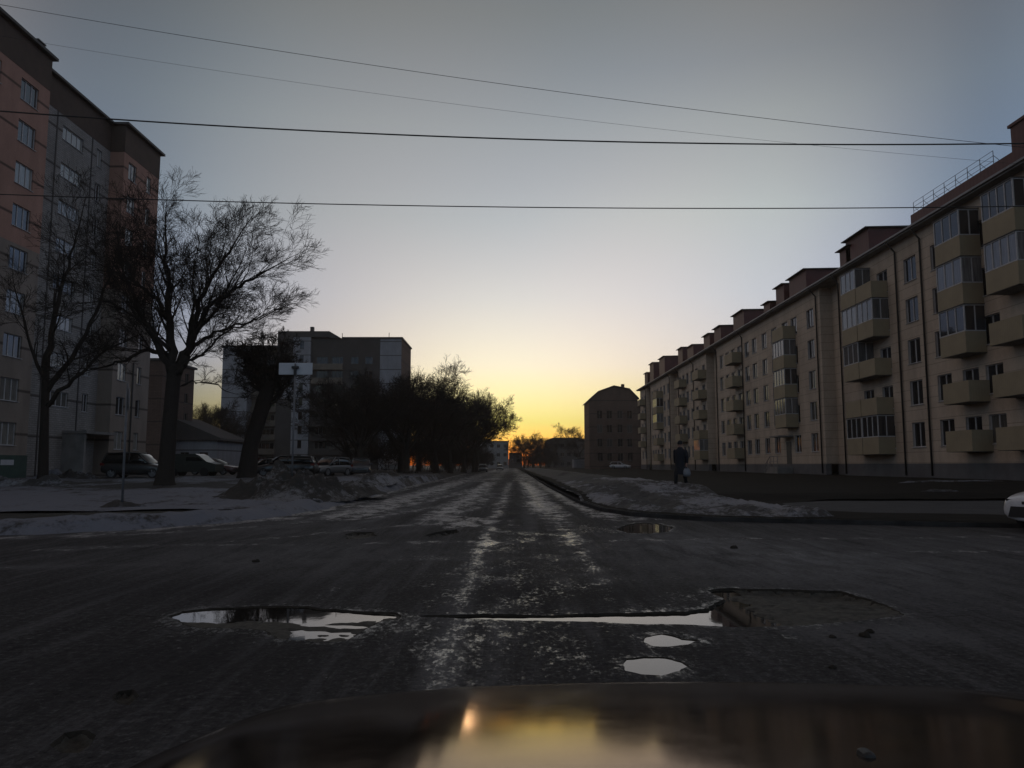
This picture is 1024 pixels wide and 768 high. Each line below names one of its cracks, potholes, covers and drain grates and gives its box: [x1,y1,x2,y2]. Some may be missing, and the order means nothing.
pothole [623,656,688,675]
pothole [643,633,698,647]
pothole [419,588,904,627]
pothole [169,606,401,642]
pothole [425,529,460,538]
pothole [617,523,673,534]
